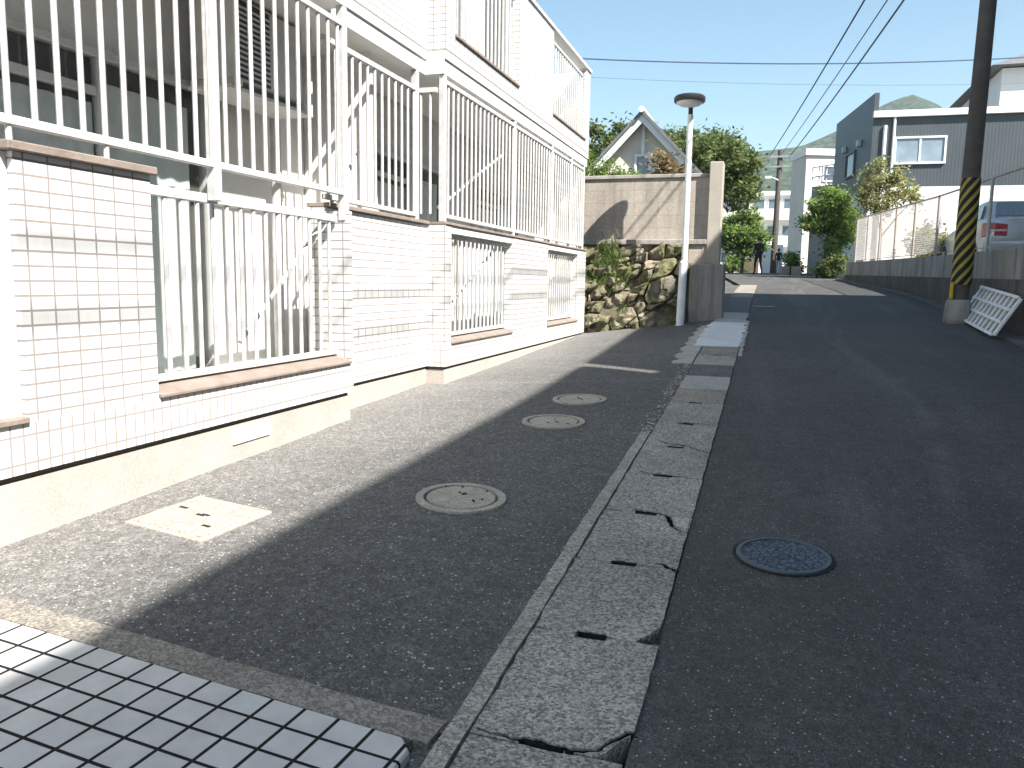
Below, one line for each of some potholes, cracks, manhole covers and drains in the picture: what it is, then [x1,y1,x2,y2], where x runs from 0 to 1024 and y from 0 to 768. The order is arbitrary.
manhole cover [733,537,836,576]
manhole cover [416,483,506,514]
crack [636,510,689,538]
manhole cover [522,414,585,430]
utility cover [125,496,272,543]
crack [489,733,638,755]
manhole cover [553,394,607,405]
